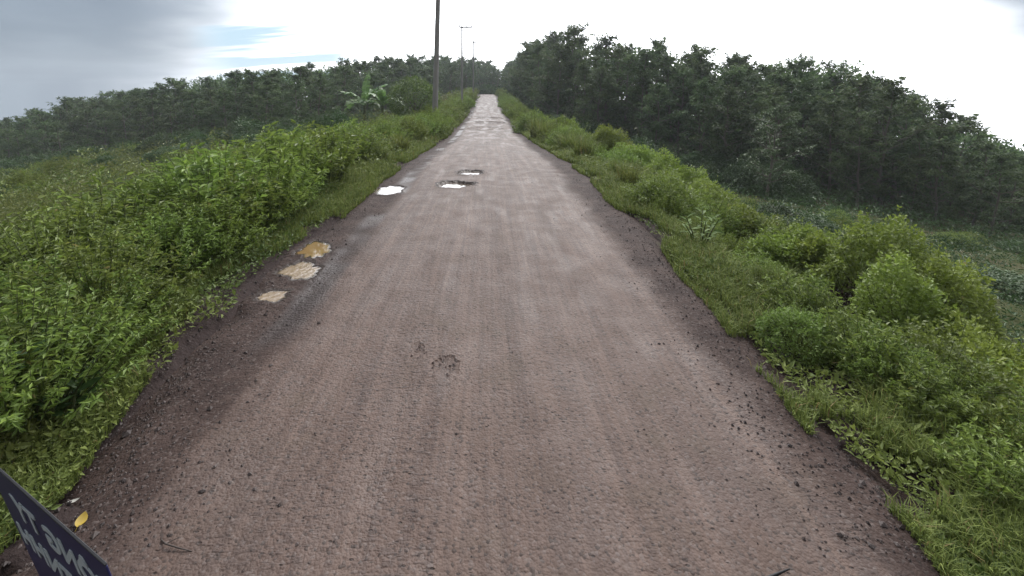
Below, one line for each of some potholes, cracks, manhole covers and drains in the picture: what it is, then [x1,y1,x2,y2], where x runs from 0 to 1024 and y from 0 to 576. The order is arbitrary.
pothole [286,238,339,262]
pothole [265,256,332,285]
pothole [431,179,482,189]
pothole [372,184,412,196]
pothole [420,349,471,386]
pothole [243,285,304,308]
